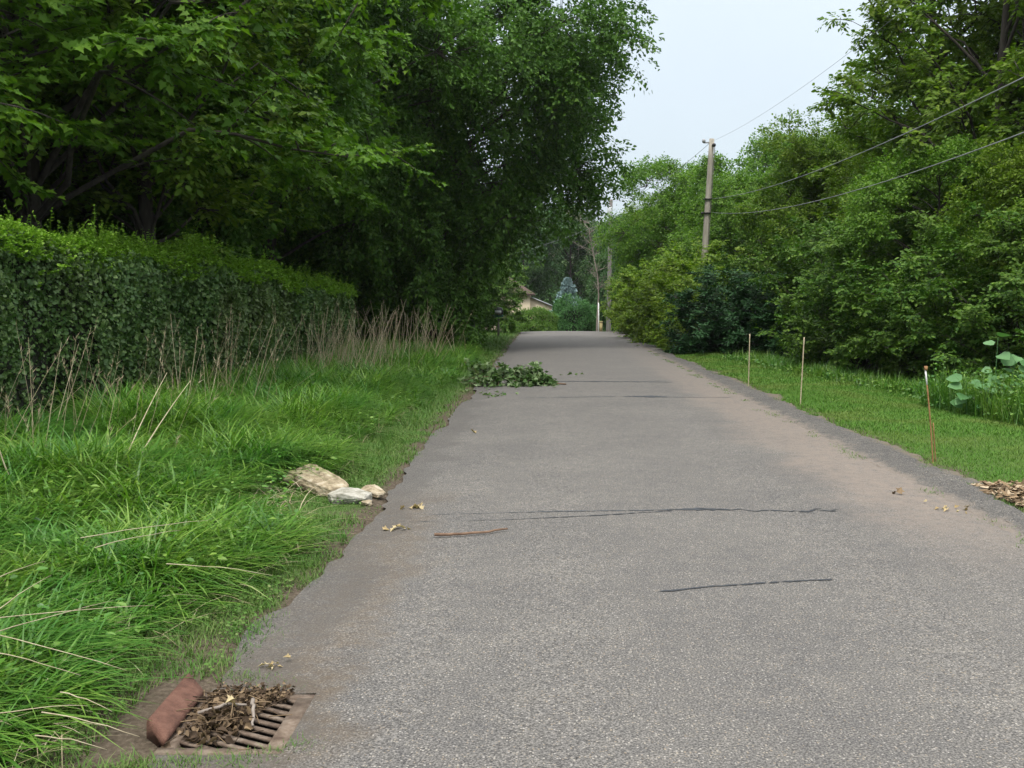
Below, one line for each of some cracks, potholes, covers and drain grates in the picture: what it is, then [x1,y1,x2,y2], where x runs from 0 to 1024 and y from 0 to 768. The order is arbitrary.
drain grate [146,673,316,756]
